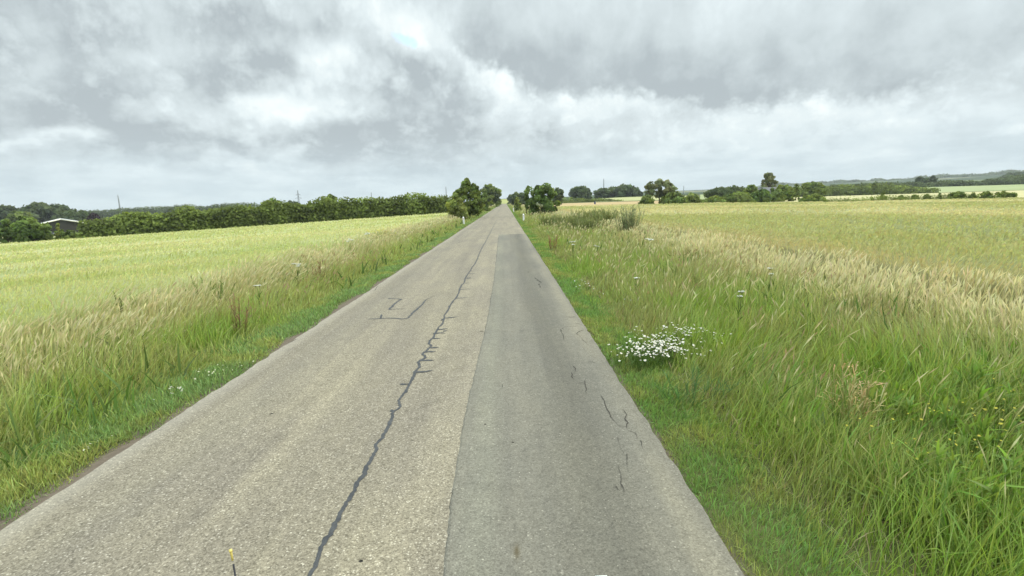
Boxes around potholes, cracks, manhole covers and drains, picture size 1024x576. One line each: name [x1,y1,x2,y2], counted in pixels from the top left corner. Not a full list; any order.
crack [571,366,643,490]
